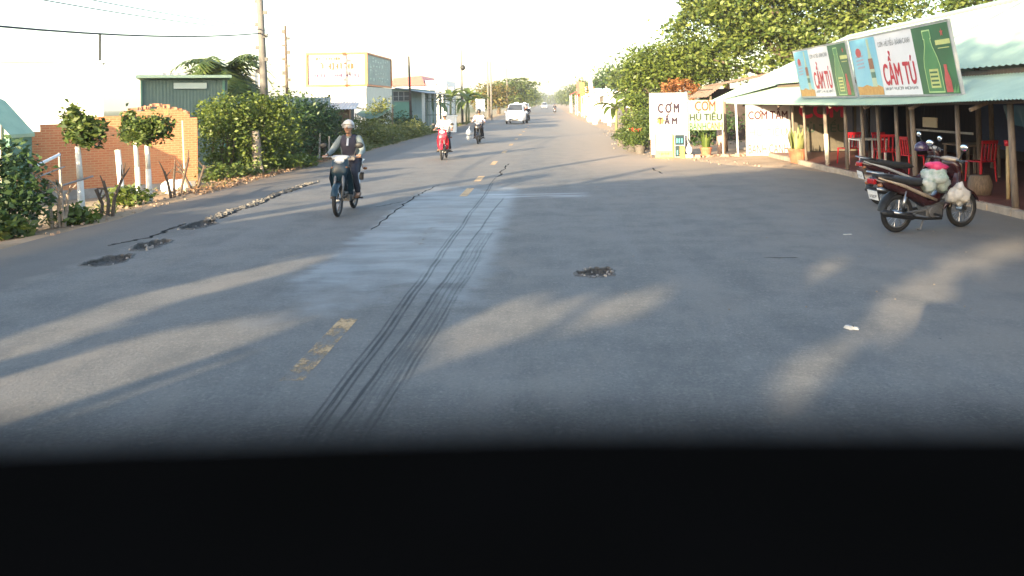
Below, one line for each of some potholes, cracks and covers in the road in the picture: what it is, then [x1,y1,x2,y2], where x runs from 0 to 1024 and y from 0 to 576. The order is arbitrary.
crack [371,185,438,230]
pothole [77,253,135,267]
crack [205,180,320,221]
crack [108,223,187,246]
pothole [129,238,175,251]
pothole [573,266,616,278]
